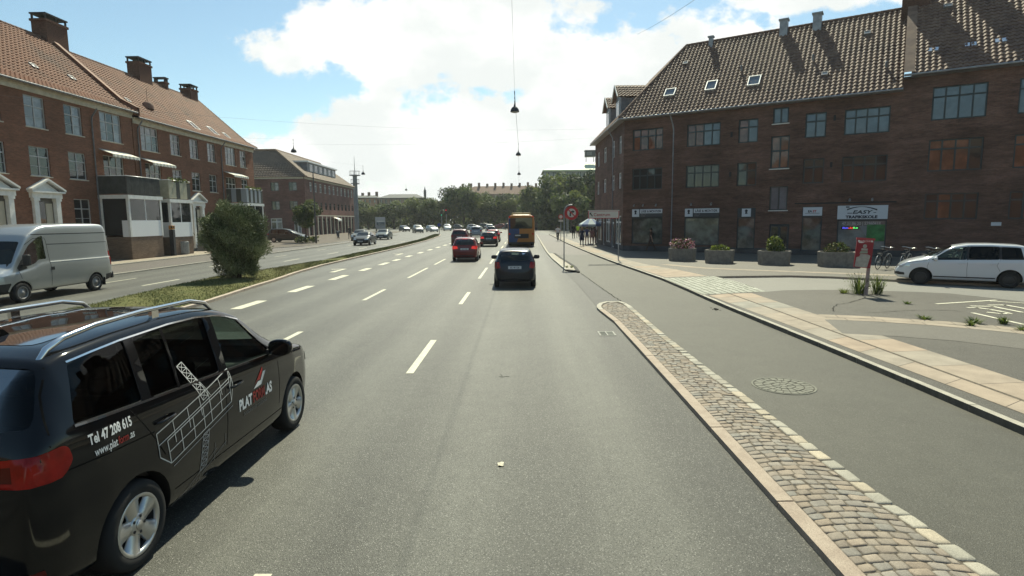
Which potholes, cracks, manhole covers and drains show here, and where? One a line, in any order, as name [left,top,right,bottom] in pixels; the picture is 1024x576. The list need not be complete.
manhole cover [751,377,817,395]
